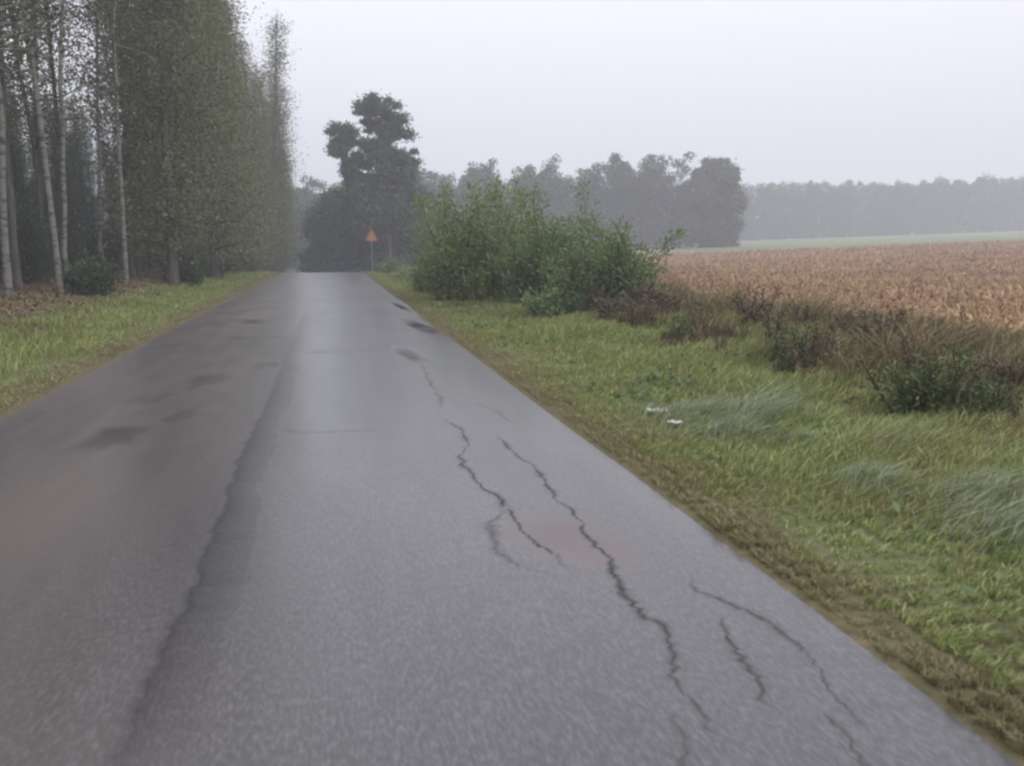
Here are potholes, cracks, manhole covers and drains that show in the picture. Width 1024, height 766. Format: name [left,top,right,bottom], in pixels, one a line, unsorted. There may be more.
pothole [394,316,454,341]
pothole [388,301,414,313]
pothole [390,345,433,365]
crack [420,364,885,766]
